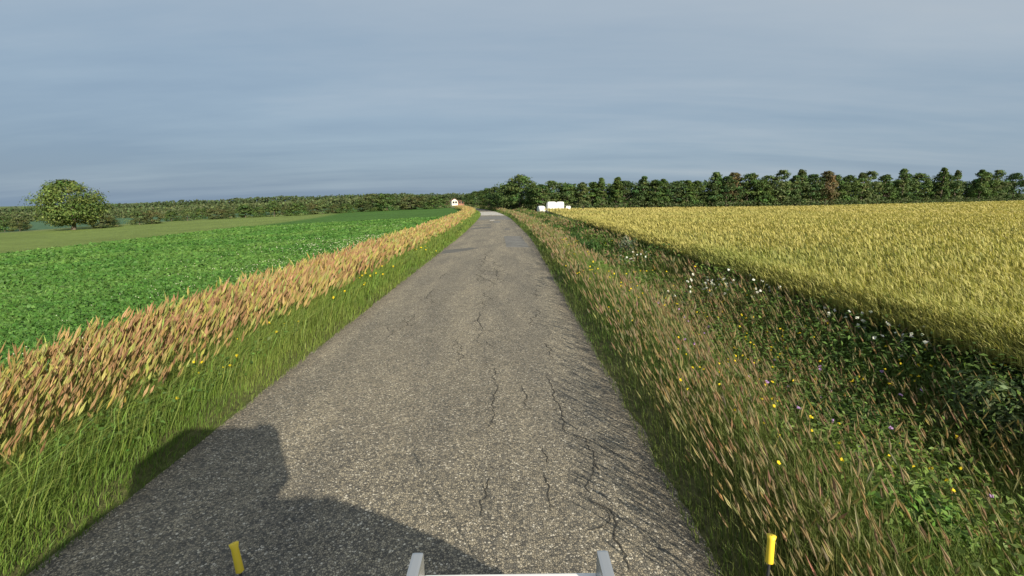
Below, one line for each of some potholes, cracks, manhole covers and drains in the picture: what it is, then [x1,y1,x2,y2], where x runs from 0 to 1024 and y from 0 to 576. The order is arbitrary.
crack [542,449,556,511]
crack [453,250,505,428]
crack [545,375,631,575]
